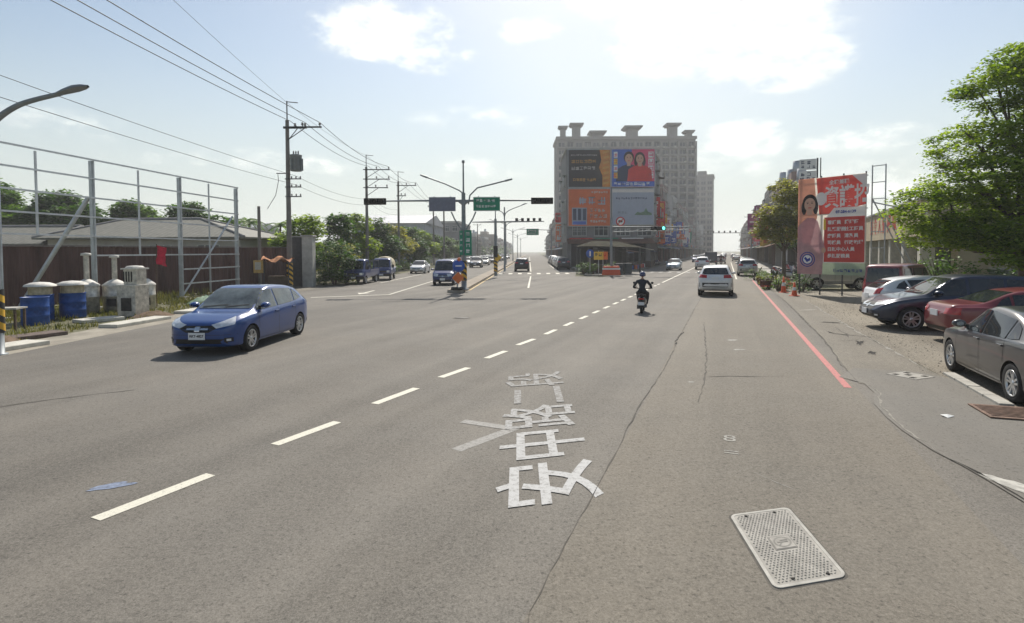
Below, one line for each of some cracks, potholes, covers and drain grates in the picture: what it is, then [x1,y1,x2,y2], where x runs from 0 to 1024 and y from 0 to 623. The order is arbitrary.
manhole cover [729,507,848,591]
crack [698,324,765,402]
